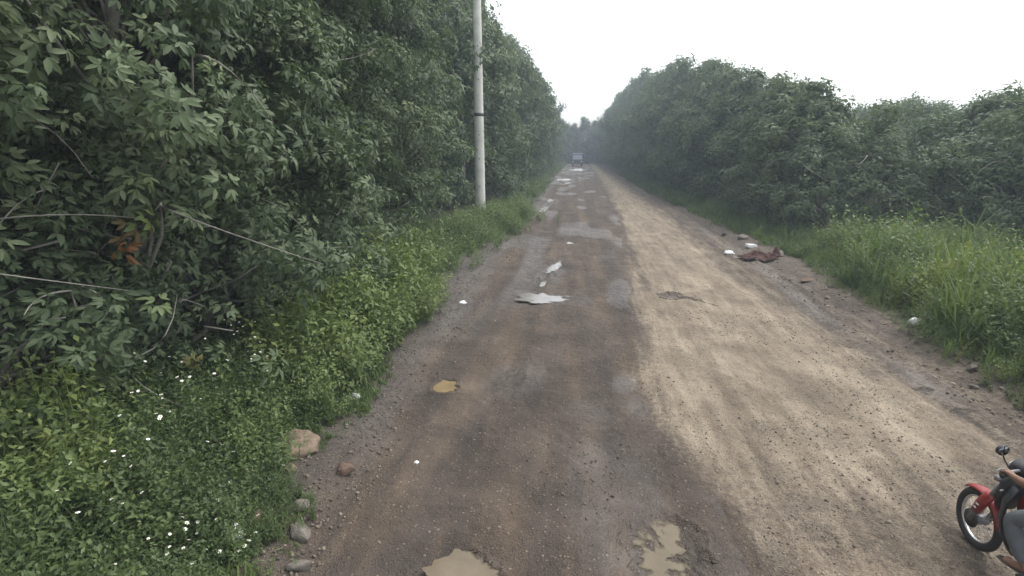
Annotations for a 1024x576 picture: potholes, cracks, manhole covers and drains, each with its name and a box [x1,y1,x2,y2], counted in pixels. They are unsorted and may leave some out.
pothole [414,543,513,576]
pothole [655,291,719,306]
pothole [615,511,730,576]
pothole [427,377,465,395]
